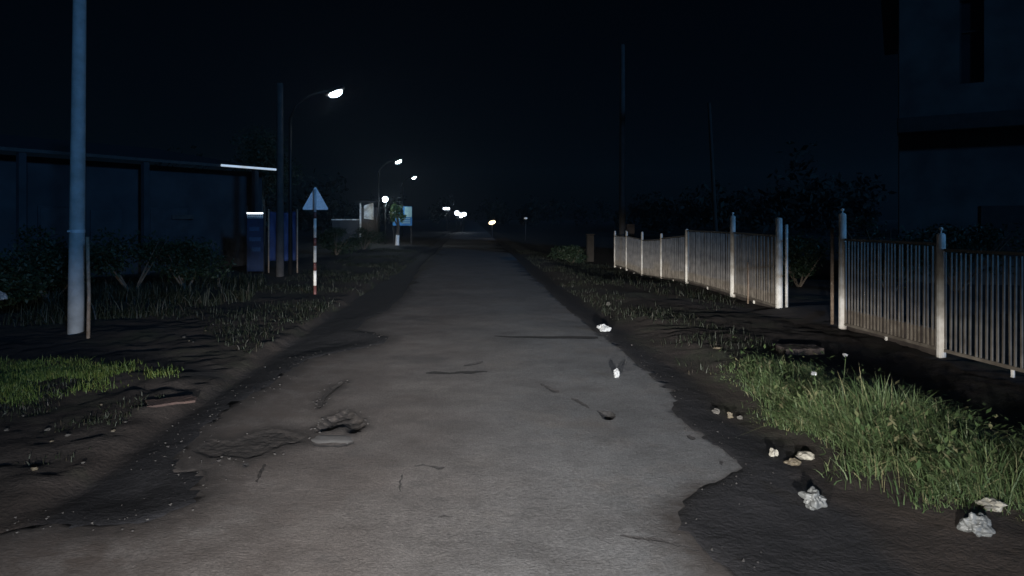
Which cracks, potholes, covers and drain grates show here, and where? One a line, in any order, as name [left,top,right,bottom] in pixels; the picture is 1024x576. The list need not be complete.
crack [620,535,700,552]
crack [540,383,589,408]
crack [317,381,347,409]
crack [425,361,487,374]
crack [255,464,266,482]
crack [399,464,445,491]
pothole [191,429,307,460]
pothole [597,410,616,420]
pothole [314,410,367,434]
